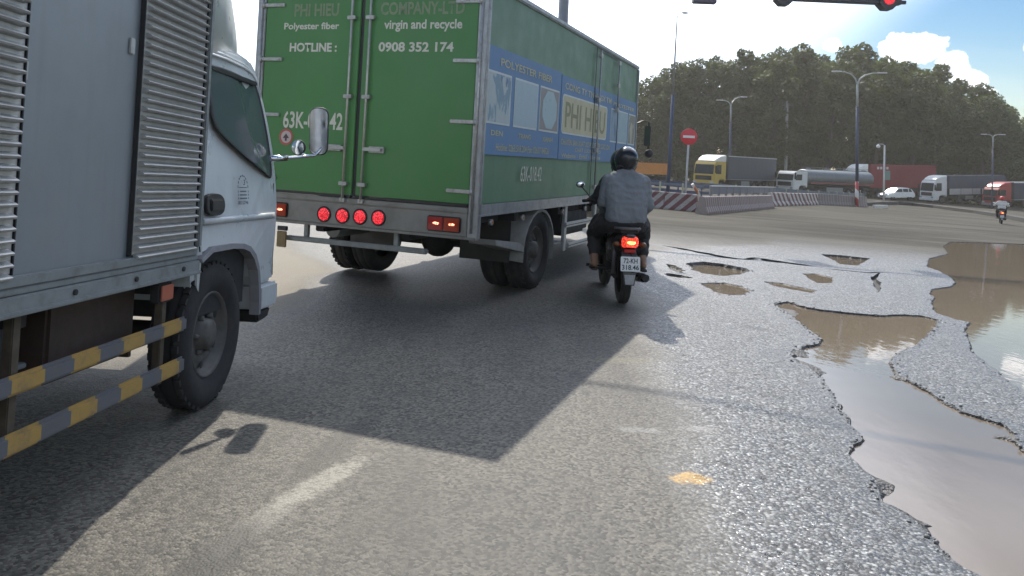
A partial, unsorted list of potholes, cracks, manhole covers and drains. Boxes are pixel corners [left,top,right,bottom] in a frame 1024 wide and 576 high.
pothole [764,281,817,293]
crack [662,245,886,292]
pothole [686,262,753,277]
pothole [700,281,754,296]
pothole [804,273,835,283]
pothole [822,254,870,266]
pothole [769,301,1024,576]
pothole [927,242,1024,393]
